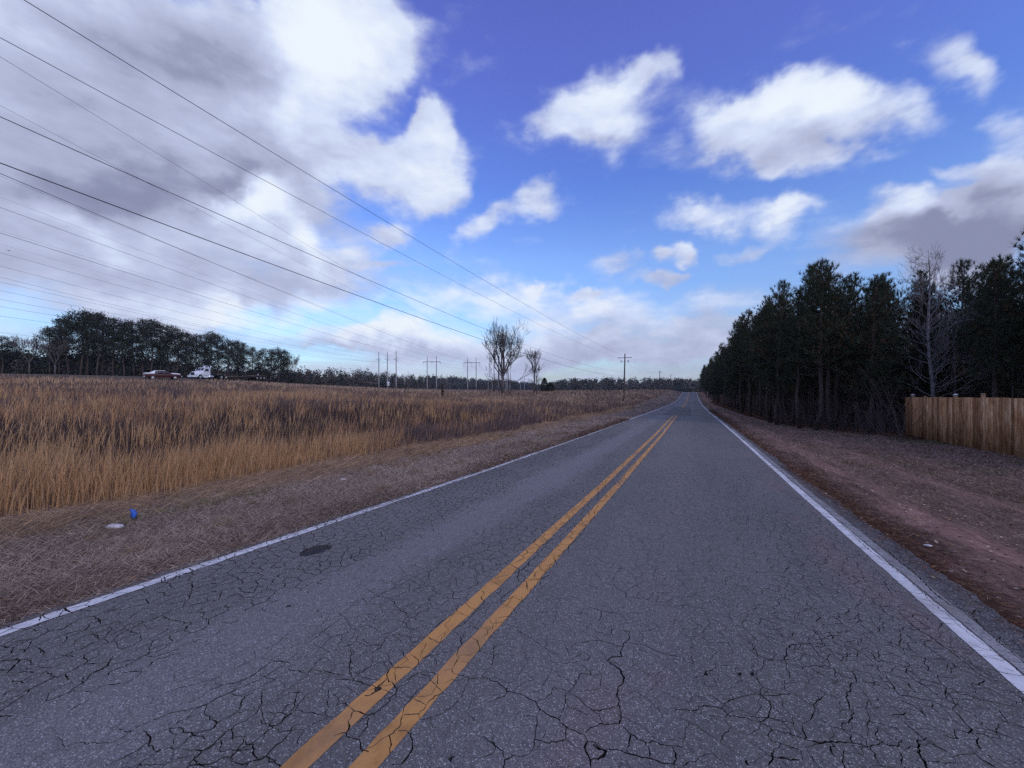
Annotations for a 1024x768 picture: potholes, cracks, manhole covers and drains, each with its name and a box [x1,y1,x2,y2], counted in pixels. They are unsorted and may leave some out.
crack [57,435,653,768]
crack [421,451,1024,768]
pothole [300,544,333,557]
